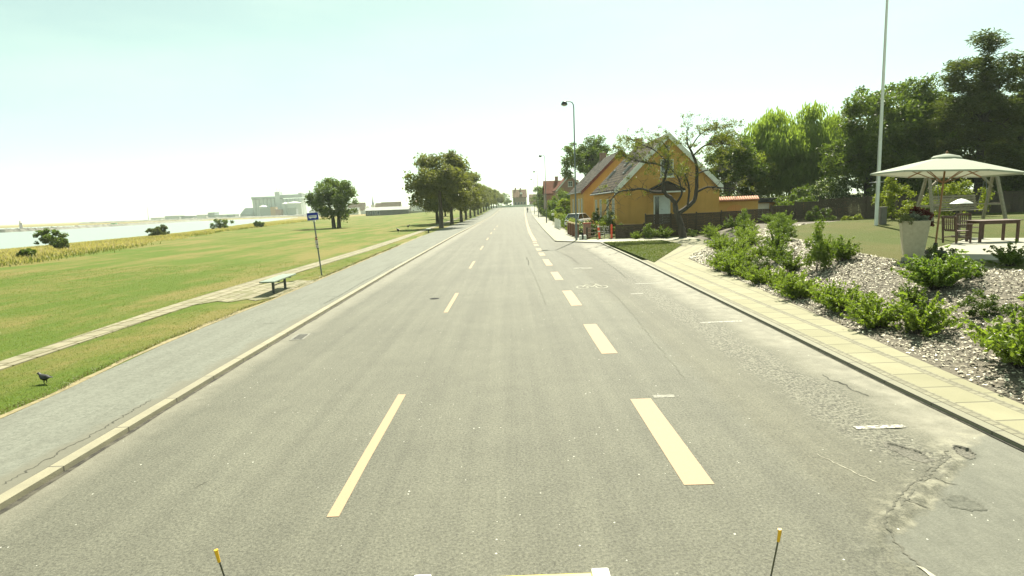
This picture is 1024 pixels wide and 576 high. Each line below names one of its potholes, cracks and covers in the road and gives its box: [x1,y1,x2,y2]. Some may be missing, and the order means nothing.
crack [5,400,151,483]
crack [819,450,958,576]
pothole [951,445,976,460]
